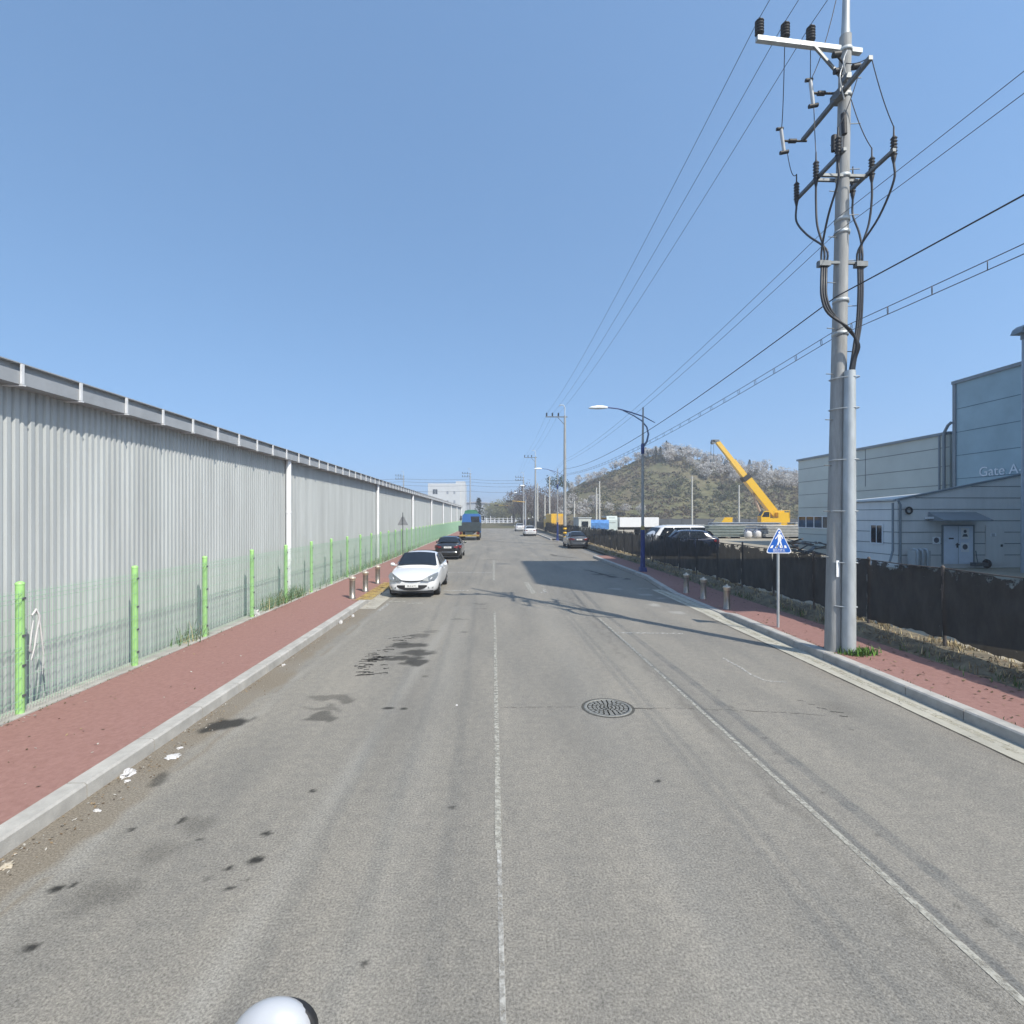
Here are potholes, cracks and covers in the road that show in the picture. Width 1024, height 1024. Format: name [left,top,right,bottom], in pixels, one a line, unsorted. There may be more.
manhole cover [581,698,635,718]
